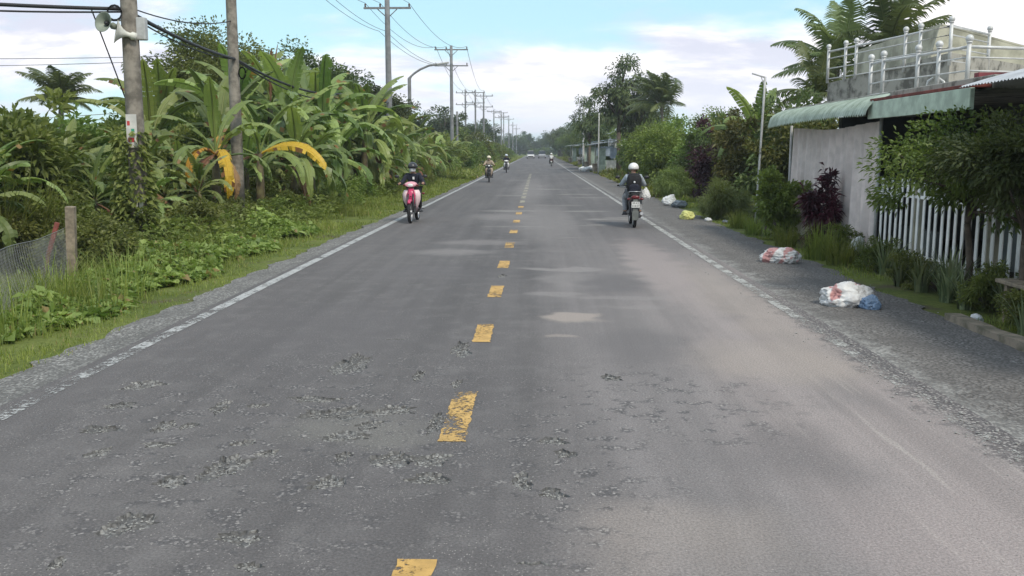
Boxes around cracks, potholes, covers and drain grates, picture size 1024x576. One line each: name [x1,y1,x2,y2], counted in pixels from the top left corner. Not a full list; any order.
pothole [214,529,270,548]
pothole [94,512,160,539]
pothole [449,341,472,359]
pothole [151,475,189,489]
pothole [403,472,453,485]
pothole [511,471,534,492]
pothole [195,453,258,483]
pothole [600,373,622,381]
pothole [553,448,578,459]
pothole [253,449,279,457]
pothole [327,353,374,375]
pothole [318,430,377,442]
